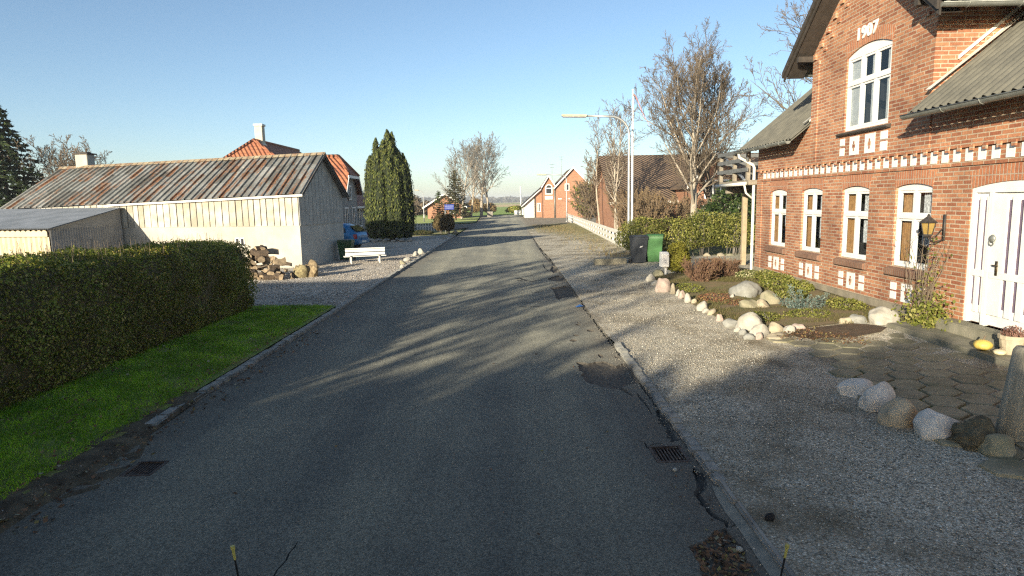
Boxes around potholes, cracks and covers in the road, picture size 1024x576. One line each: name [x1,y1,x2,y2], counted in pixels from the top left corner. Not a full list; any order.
pothole [688,528,760,576]
drain grate [119,460,169,477]
drain grate [647,445,691,463]
crack [692,469,735,528]
crack [580,300,620,356]
